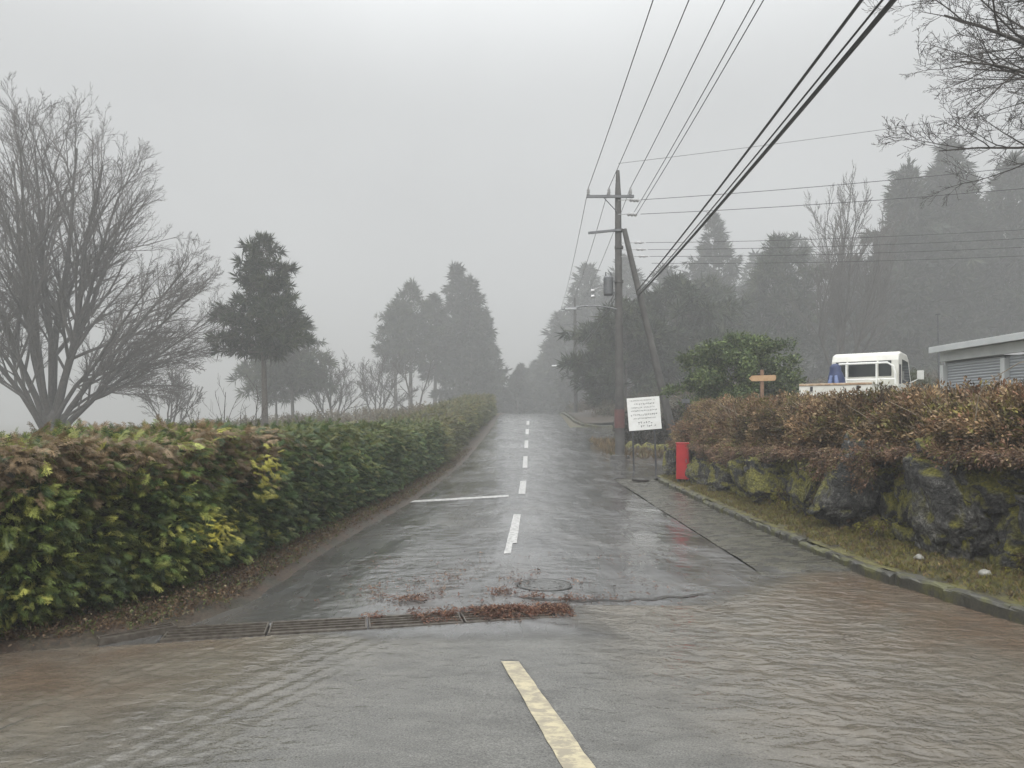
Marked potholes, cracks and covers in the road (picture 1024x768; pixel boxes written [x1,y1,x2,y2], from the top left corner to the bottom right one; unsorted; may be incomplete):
manhole cover [517,579,572,591]
drain grate [268,616,367,635]
drain grate [160,622,269,642]
drain grate [368,611,464,629]
